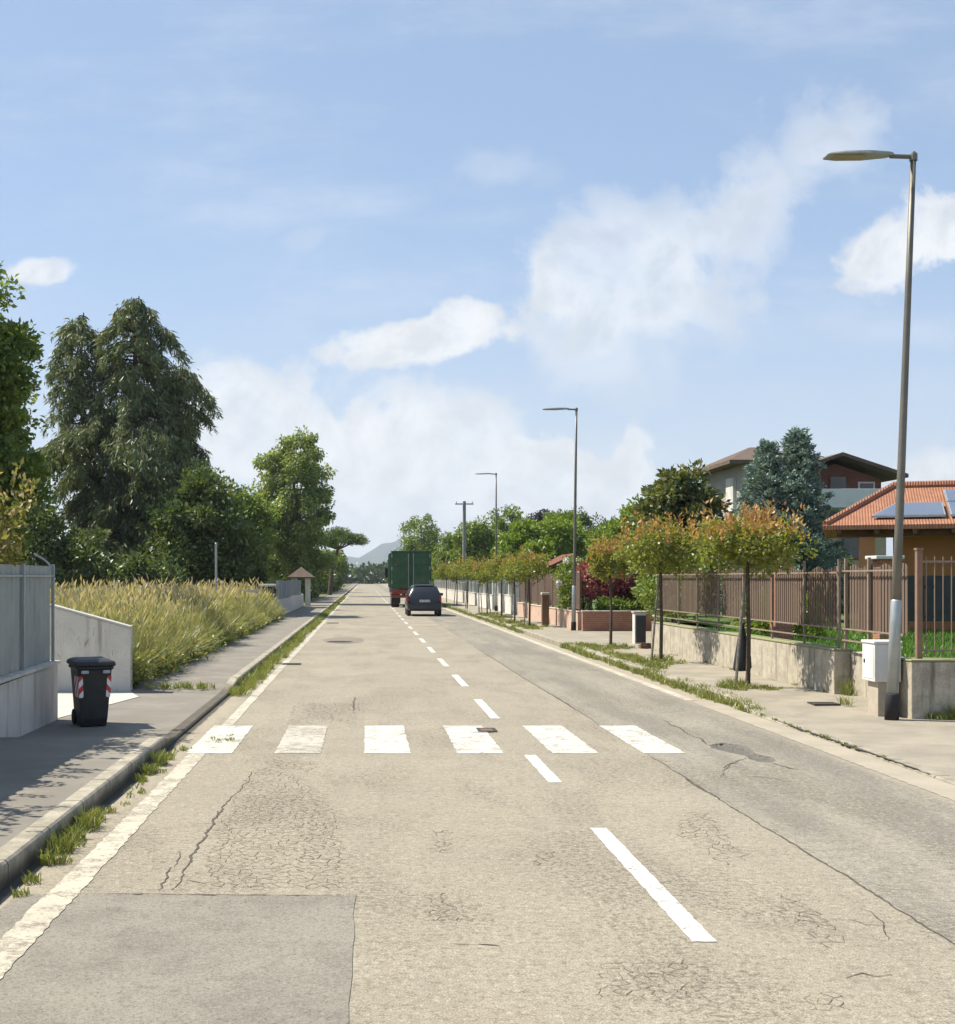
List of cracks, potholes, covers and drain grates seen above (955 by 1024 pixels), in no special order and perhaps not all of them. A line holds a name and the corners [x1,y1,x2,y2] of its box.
crack [678,813,748,865]
crack [660,718,798,782]
crack [598,959,711,1000]
crack [158,760,346,891]
crack [778,895,890,1010]
pothole [709,743,776,763]
crack [428,892,459,920]
